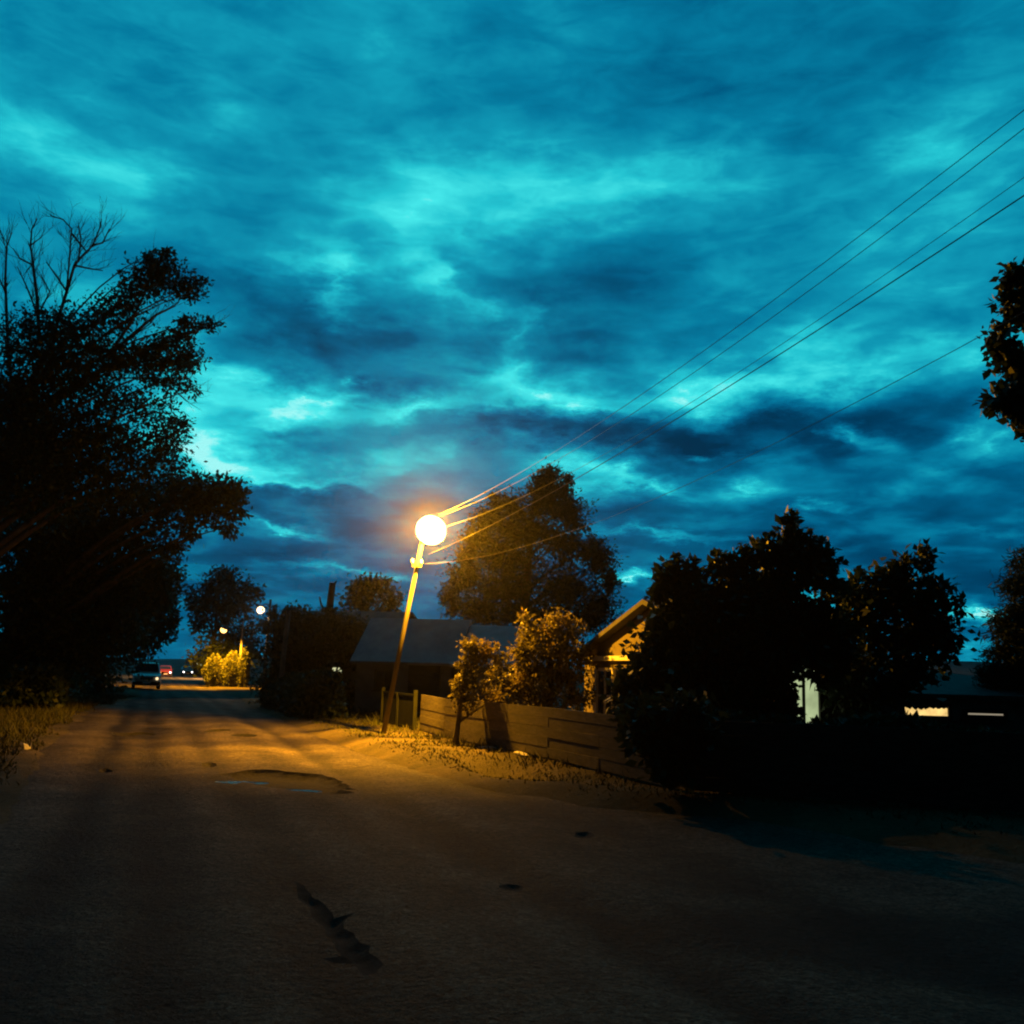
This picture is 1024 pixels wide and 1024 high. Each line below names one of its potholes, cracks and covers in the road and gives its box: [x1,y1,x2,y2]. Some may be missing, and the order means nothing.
pothole [214,769,356,795]
pothole [499,884,523,892]
